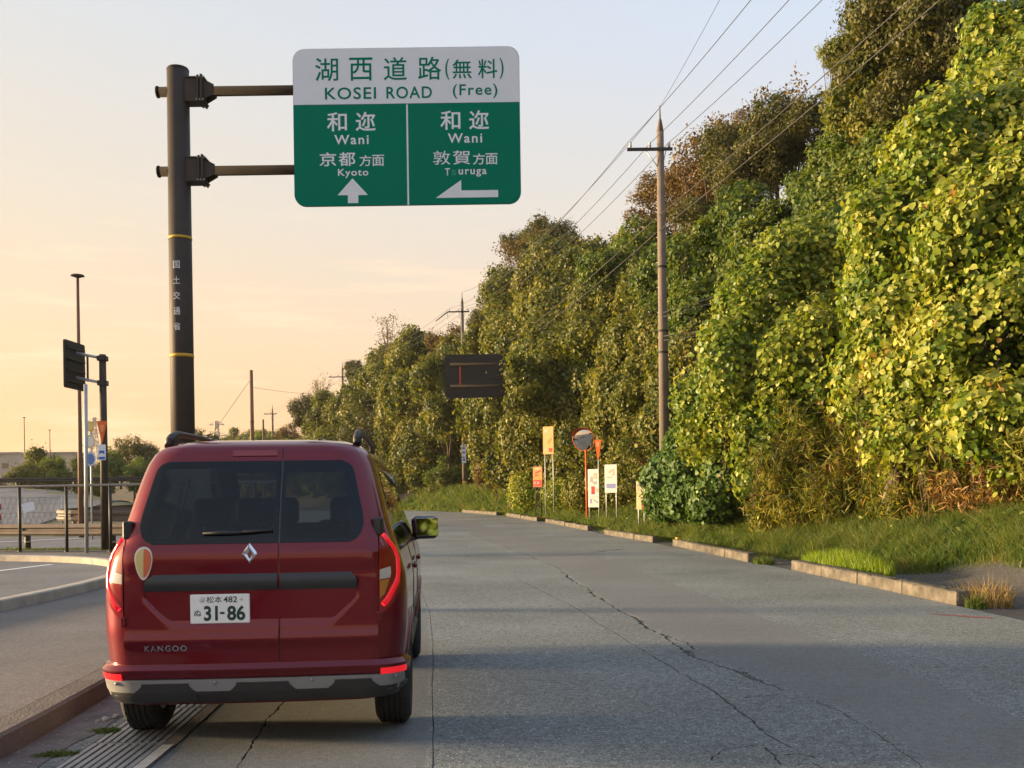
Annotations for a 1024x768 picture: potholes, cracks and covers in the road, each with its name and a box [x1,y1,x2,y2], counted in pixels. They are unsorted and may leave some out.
crack [237,702,284,768]
crack [475,535,783,698]
crack [813,701,922,767]
drain grate [55,704,215,768]
crack [711,744,823,768]
